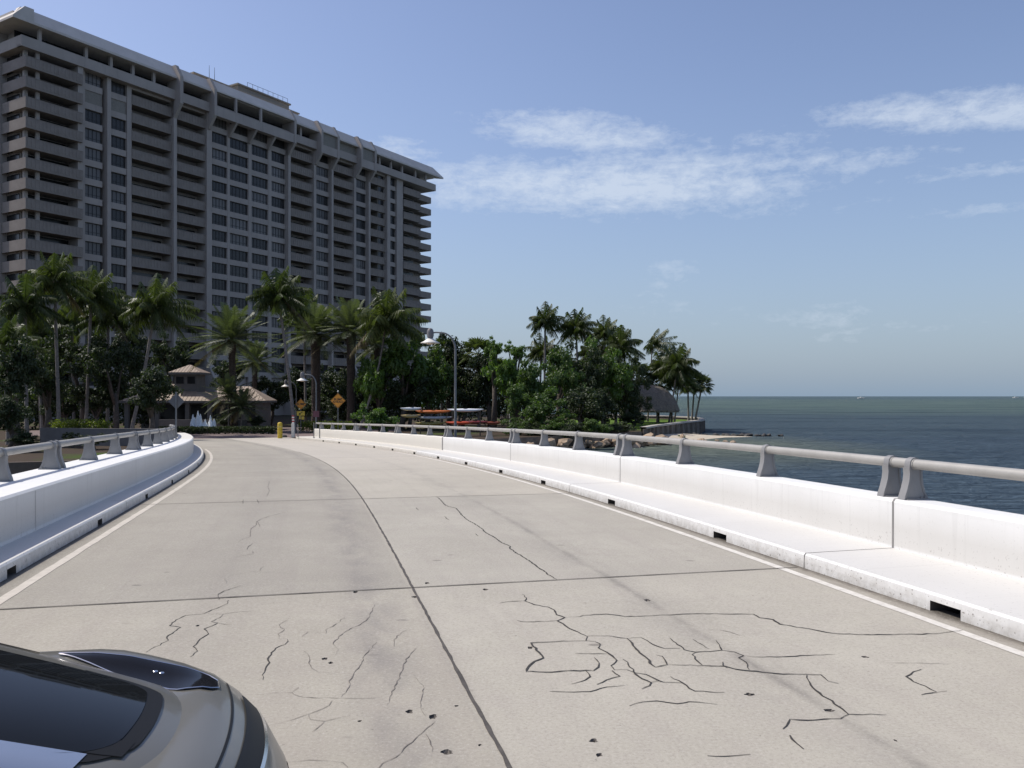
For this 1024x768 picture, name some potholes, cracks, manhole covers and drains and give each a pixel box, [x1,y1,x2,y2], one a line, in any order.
crack [259,605,376,732]
crack [148,568,274,657]
crack [554,685,713,706]
crack [380,629,433,766]
crack [439,498,556,579]
crack [905,663,943,695]
